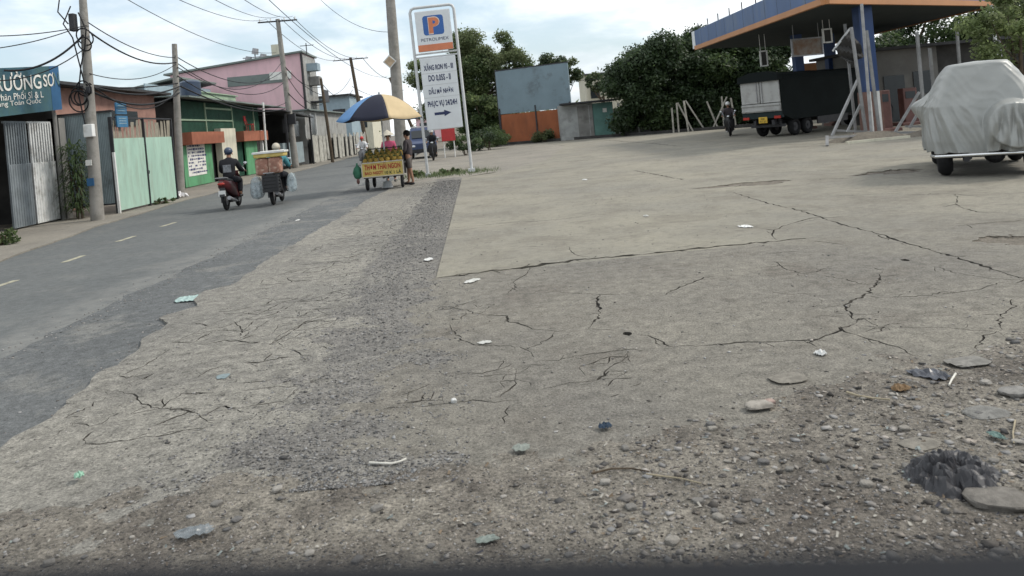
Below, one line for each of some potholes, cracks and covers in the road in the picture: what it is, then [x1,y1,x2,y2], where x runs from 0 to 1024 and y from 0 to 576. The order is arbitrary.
pothole [852,168,922,176]
crack [56,215,402,445]
pothole [972,234,1024,245]
crack [384,216,1017,423]
pothole [694,180,791,189]
crack [757,170,1020,228]
